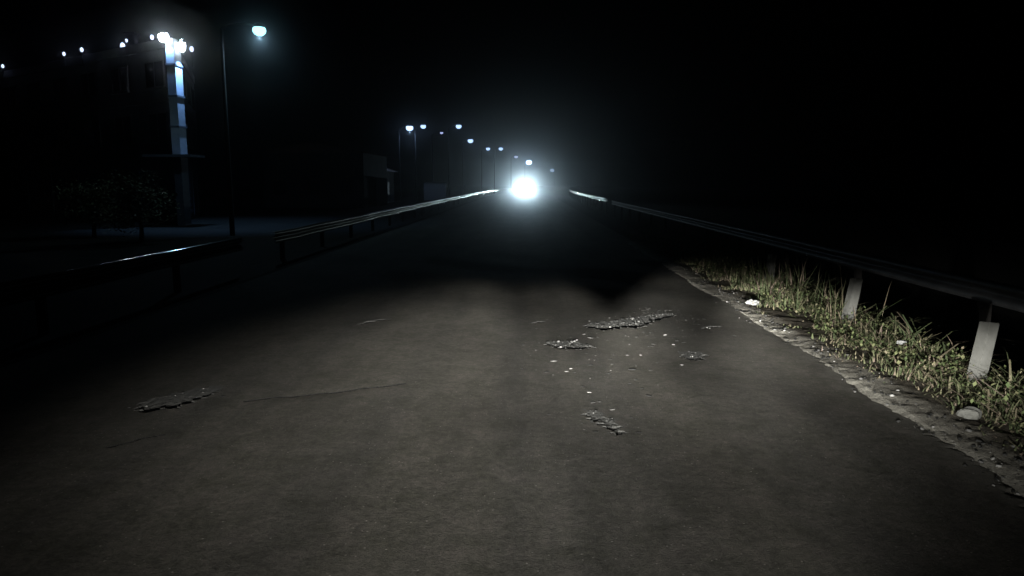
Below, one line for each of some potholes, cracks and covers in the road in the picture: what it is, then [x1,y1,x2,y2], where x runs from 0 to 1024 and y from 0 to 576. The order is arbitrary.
pothole [583,312,676,331]
pothole [677,350,709,361]
pothole [580,409,629,436]
crack [244,383,406,402]
pothole [126,385,224,413]
pothole [536,339,597,351]
crack [106,434,166,448]
